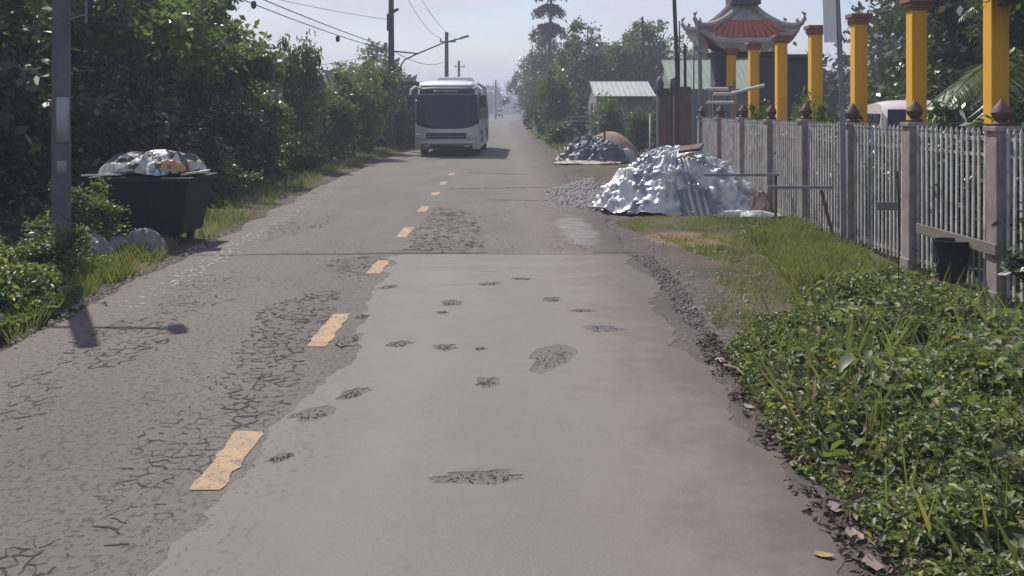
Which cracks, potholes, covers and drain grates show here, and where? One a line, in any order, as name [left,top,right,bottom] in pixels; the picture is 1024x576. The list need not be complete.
crack [0,370,62,429]
pothole [582,325,630,333]
pothole [385,340,415,348]
pothole [335,333,364,347]
pothole [286,405,337,423]
pothole [527,344,579,374]
crack [396,173,549,251]
pothole [428,469,525,485]
pothole [475,377,501,388]
pothole [432,344,461,352]
crack [325,256,385,280]
crack [57,312,186,368]
